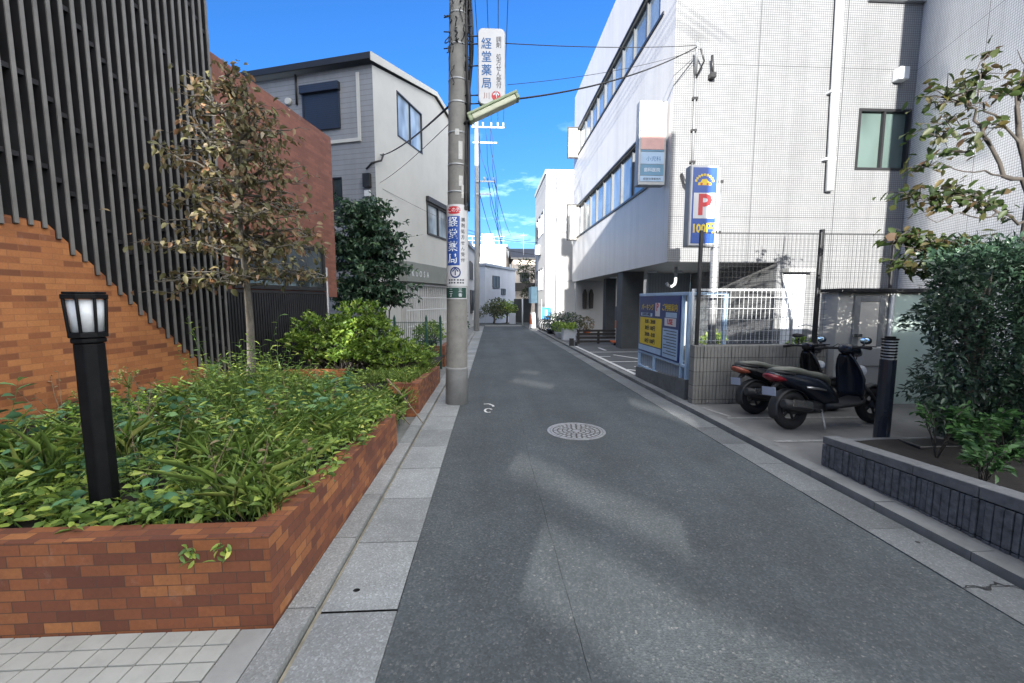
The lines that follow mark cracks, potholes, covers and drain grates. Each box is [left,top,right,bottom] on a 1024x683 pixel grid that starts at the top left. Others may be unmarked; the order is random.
crack [965,581,1020,590]
manhole cover [547,423,606,440]
